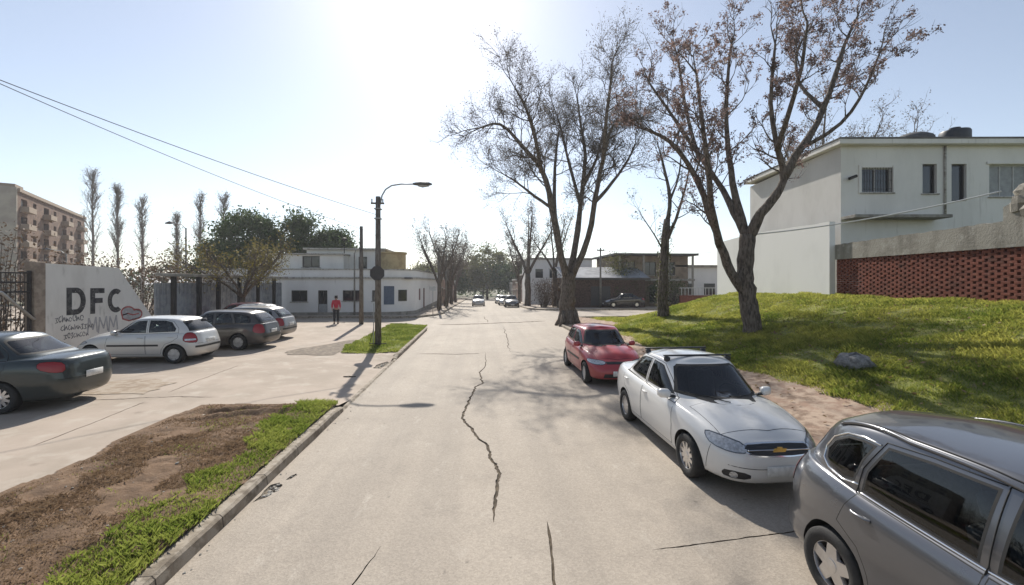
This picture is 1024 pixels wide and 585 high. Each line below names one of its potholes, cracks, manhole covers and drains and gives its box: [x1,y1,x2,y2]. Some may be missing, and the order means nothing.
pothole [253,483,282,502]
crack [437,318,538,349]
crack [655,531,795,550]
crack [461,353,502,522]
